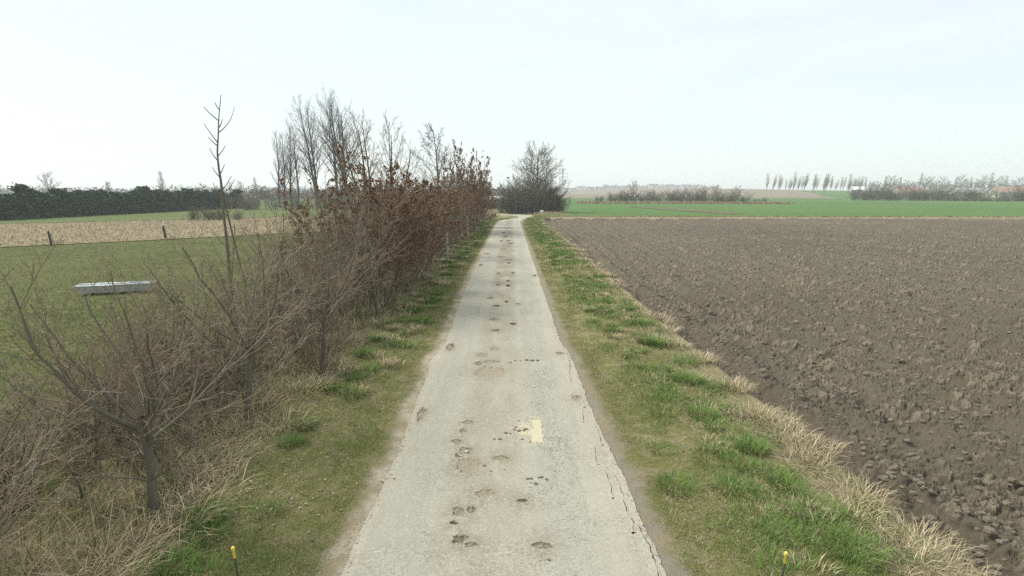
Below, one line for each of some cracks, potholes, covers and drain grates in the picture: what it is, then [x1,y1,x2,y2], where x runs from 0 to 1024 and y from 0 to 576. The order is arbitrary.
pothole [457,446,474,456]
pothole [473,488,497,499]
pothole [463,539,480,549]
pothole [451,534,471,545]
pothole [472,365,504,378]
pothole [415,406,429,423]
pothole [451,505,466,517]
pothole [529,541,554,551]
